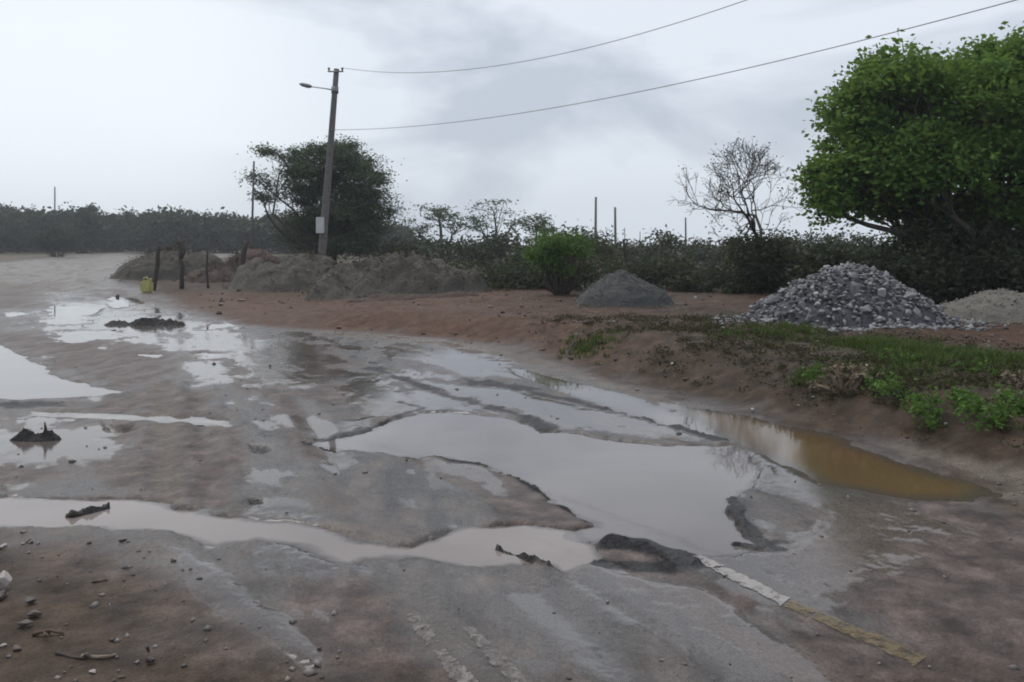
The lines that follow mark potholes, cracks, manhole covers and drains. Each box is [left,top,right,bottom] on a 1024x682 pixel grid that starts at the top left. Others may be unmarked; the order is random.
pothole [26,408,240,428]
pothole [0,492,612,573]
pothole [309,408,783,559]
pothole [0,342,125,400]
